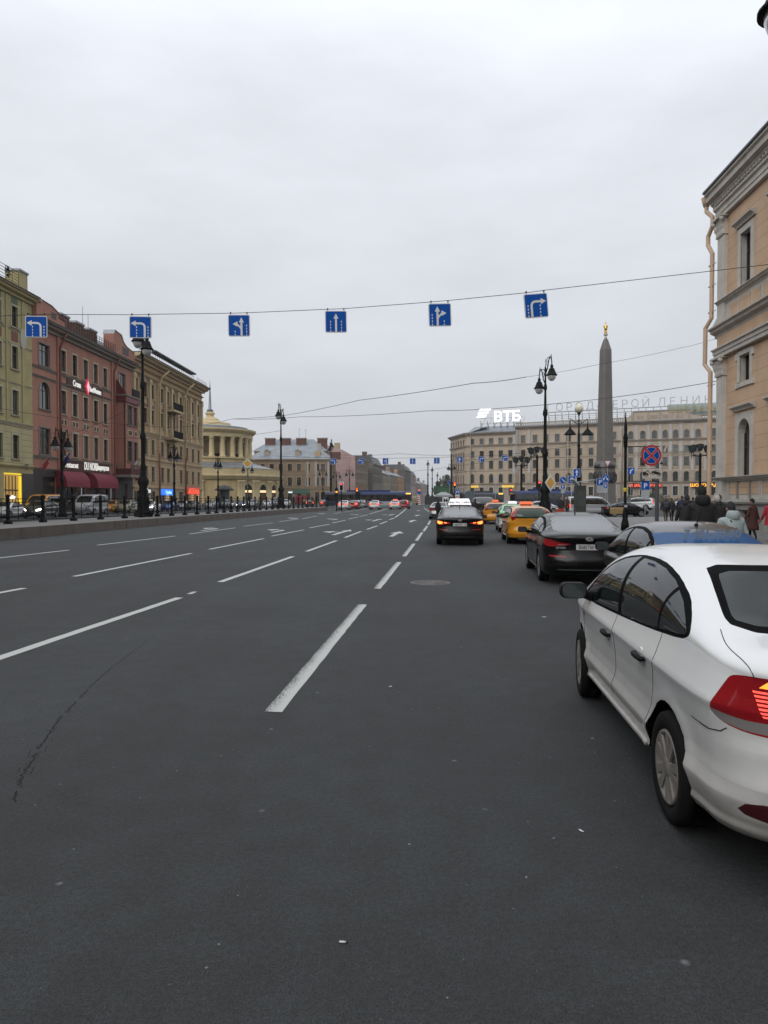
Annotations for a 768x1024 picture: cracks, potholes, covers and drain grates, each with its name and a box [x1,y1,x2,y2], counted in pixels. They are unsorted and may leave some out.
crack [12,635,155,803]
